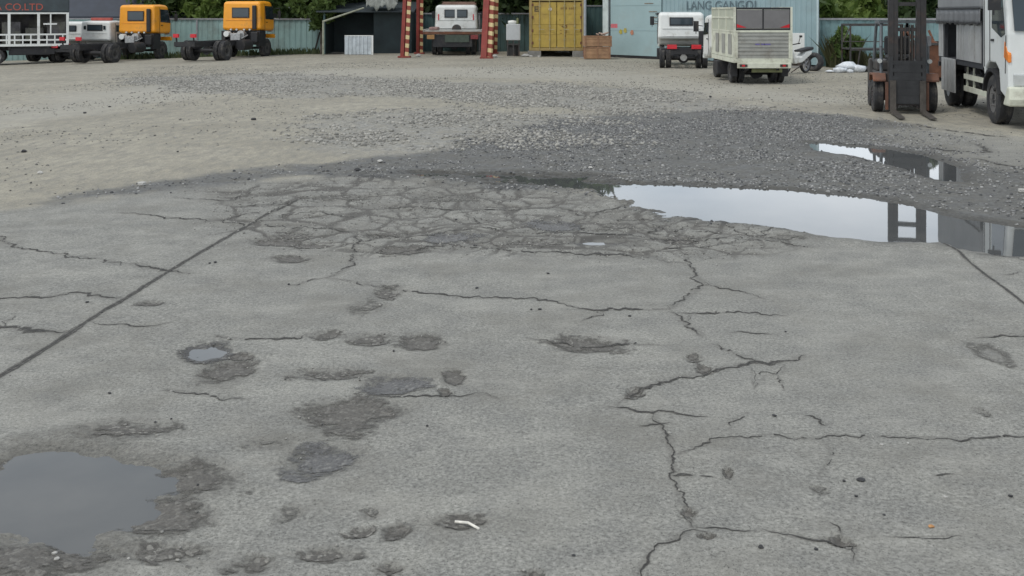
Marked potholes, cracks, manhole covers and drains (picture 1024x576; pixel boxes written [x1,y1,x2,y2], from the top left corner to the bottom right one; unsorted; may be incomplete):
crack [121,189,1024,576]
pothole [538,334,652,354]
pothole [177,340,234,364]
crack [0,291,122,299]
crack [1,236,179,272]
pothole [278,441,363,483]
pothole [292,392,406,440]
pothole [198,359,260,383]
crack [0,317,61,333]
pothole [963,342,1016,368]
